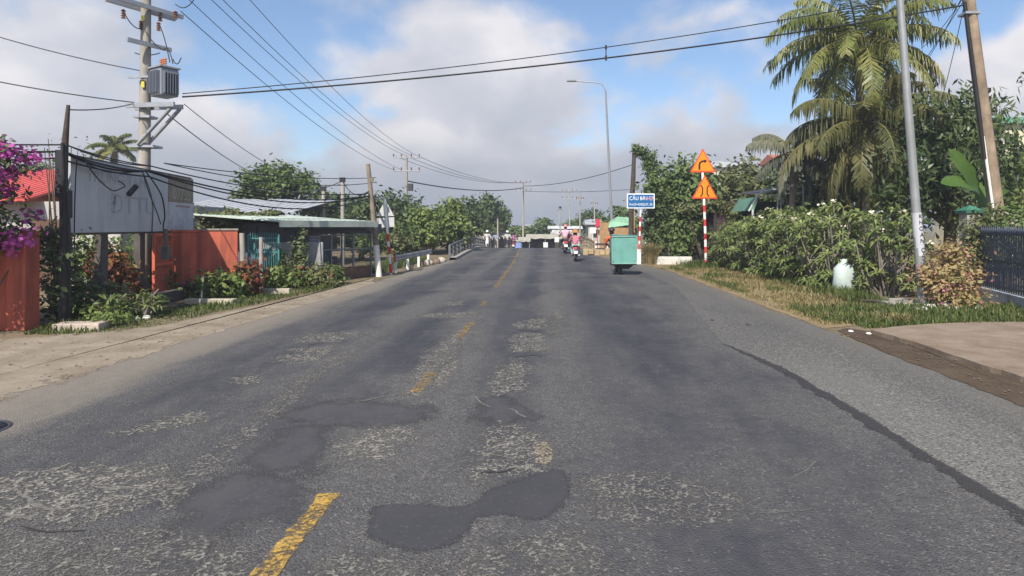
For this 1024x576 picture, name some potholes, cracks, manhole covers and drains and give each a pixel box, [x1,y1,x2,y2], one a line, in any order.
manhole cover [0,420,13,432]
crack [355,301,569,488]
